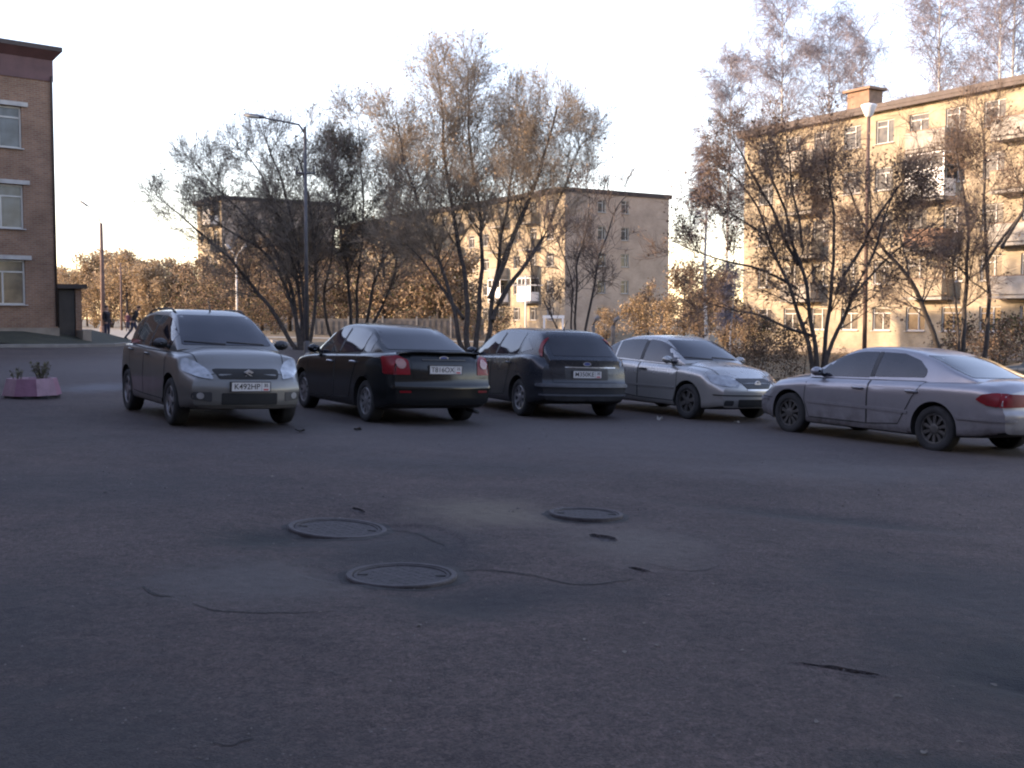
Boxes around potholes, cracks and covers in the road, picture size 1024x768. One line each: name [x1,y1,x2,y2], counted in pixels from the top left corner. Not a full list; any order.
crack [192,603,330,613]
manhole cover [541,507,629,524]
manhole cover [337,562,469,592]
manhole cover [281,518,395,541]
crack [466,563,719,585]
